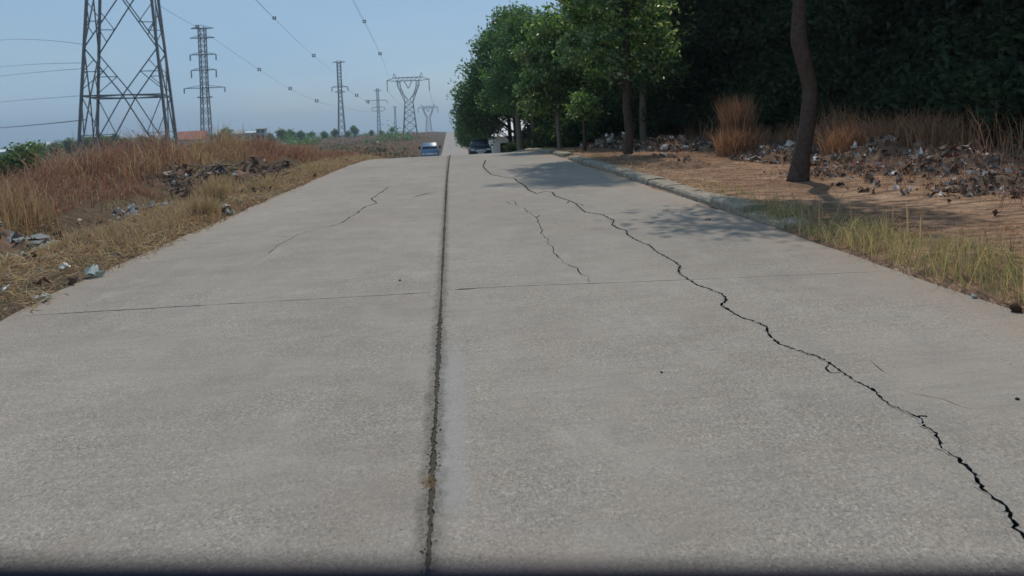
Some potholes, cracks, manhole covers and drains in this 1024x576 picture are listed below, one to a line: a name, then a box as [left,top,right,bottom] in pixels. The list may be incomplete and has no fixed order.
crack [269,181,389,253]
crack [483,160,1024,539]
